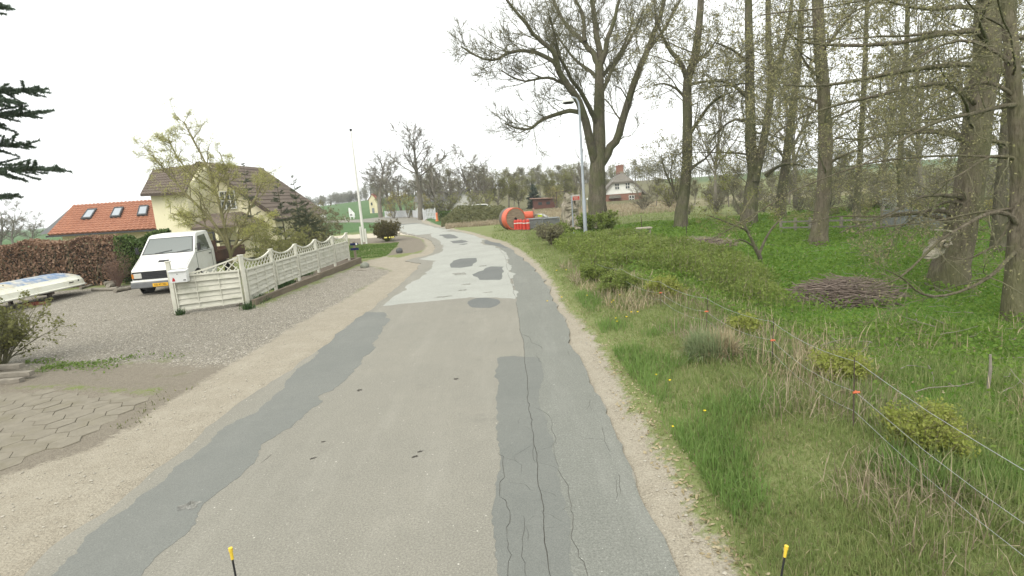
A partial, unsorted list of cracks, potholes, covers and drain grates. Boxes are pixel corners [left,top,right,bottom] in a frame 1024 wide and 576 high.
crack [499,310,588,576]
